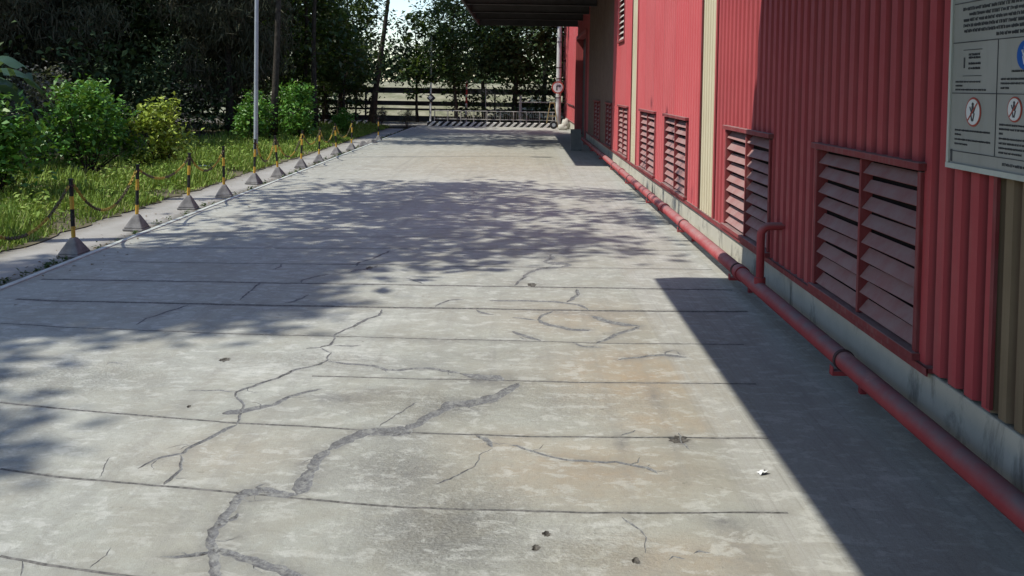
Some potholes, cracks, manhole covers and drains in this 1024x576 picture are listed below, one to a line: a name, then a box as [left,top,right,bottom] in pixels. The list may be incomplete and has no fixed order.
crack [138,274,667,576]
crack [477,250,686,360]
